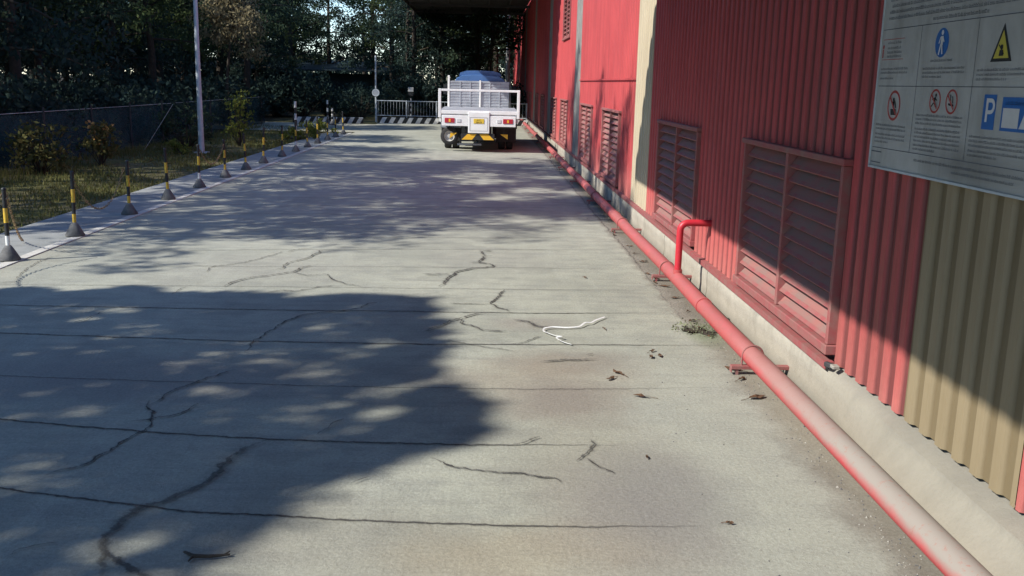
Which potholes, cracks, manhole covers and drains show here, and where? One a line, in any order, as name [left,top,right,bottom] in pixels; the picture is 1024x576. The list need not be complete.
crack [578,440,614,473]
crack [425,250,494,284]
crack [428,290,550,350]
crack [438,460,560,481]
crack [208,248,359,292]
crack [56,371,247,576]
